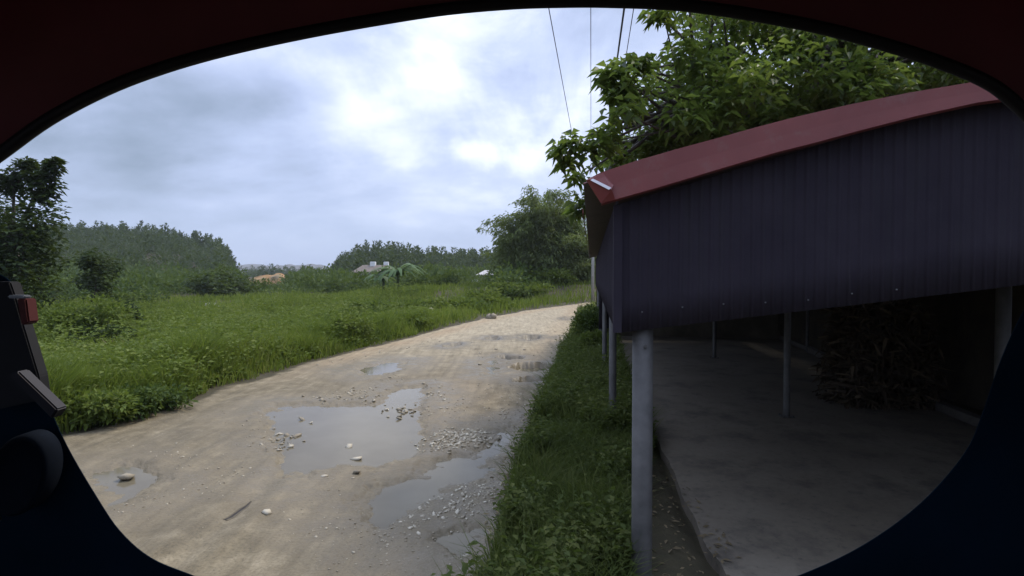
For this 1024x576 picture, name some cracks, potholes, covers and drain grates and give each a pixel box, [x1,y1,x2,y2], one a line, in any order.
pothole [344,421,525,534]
pothole [503,362,553,372]
pothole [80,457,181,509]
pothole [347,359,415,376]
pothole [253,383,441,482]
